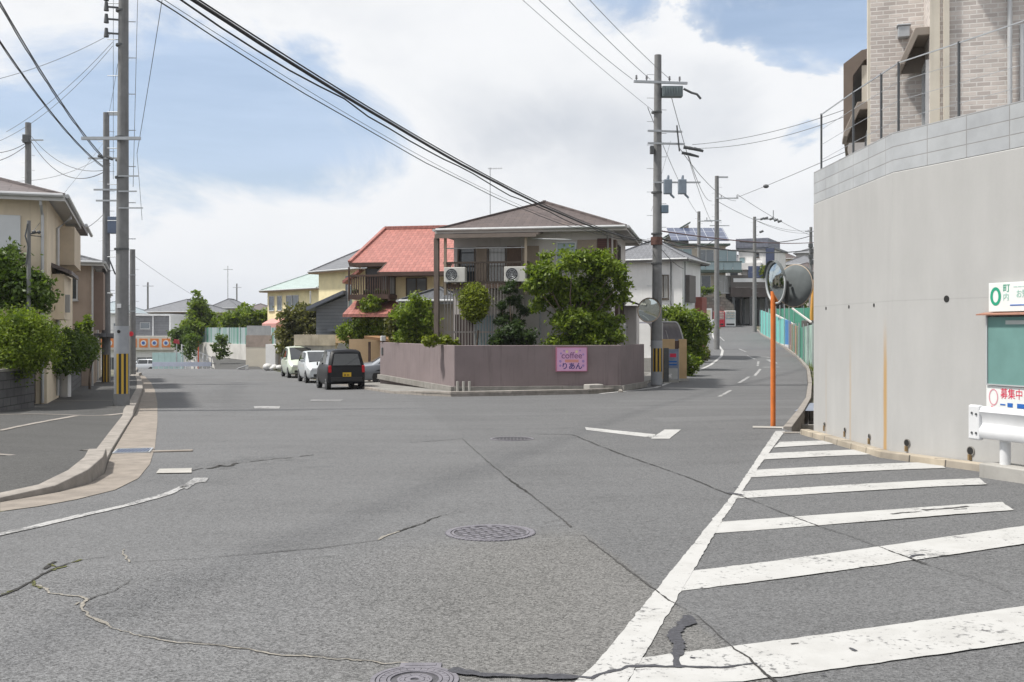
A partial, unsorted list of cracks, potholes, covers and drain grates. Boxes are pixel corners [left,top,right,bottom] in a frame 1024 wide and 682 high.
manhole cover [370,663,459,682]
crack [192,455,308,471]
manhole cover [445,524,536,542]
crack [0,549,408,664]
